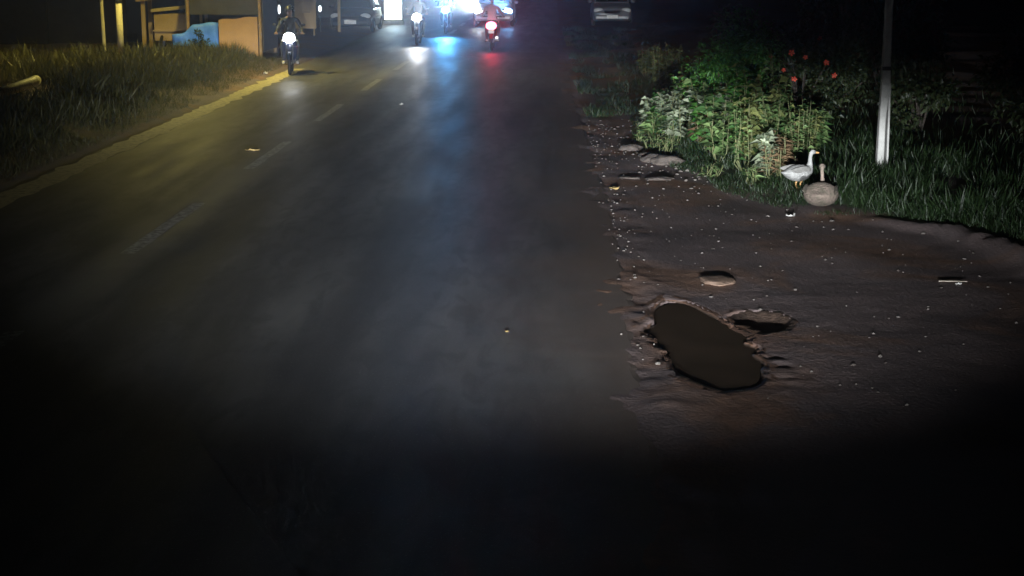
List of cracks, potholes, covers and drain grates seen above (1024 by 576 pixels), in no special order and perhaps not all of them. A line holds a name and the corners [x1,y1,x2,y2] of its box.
pothole [633,294,779,396]
pothole [717,309,798,337]
